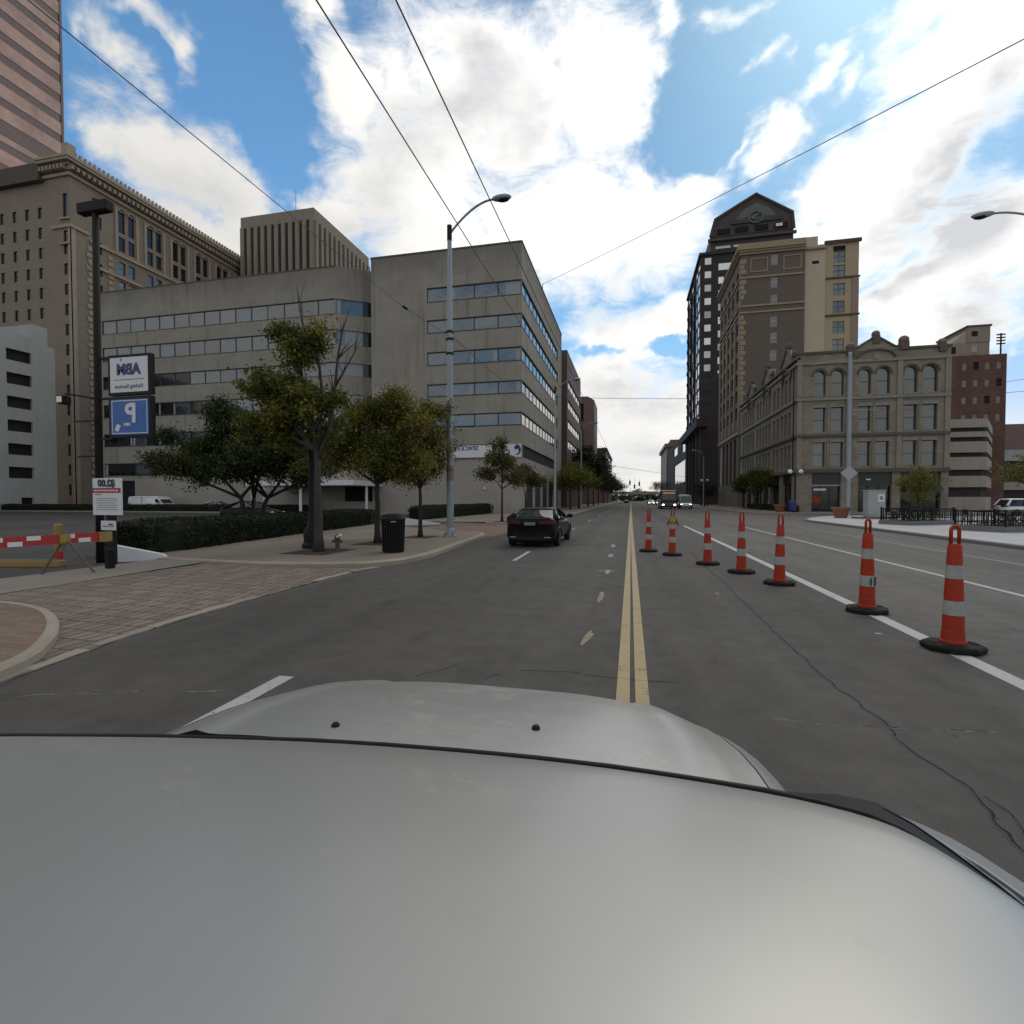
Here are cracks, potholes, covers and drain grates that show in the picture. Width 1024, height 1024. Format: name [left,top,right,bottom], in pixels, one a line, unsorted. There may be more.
crack [689,551,1024,858]
crack [523,670,676,683]
